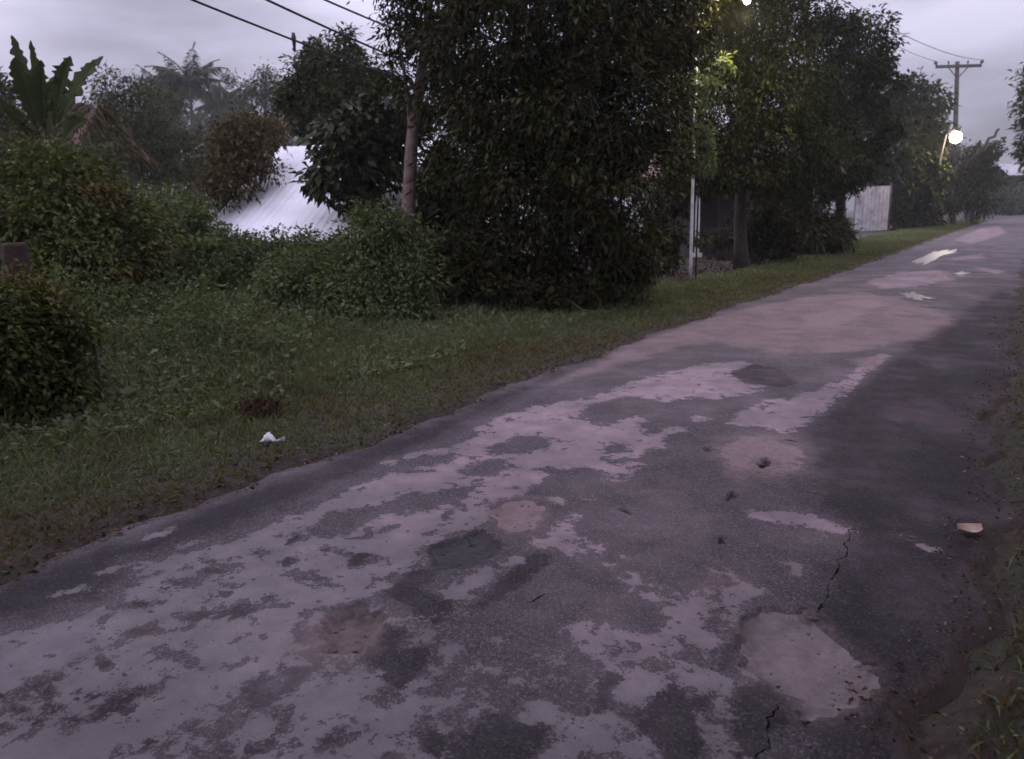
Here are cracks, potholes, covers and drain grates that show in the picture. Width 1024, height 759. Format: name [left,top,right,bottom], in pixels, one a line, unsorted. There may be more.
pothole [705,533,738,550]
pothole [719,488,748,505]
crack [736,694,807,759]
pothole [750,456,782,471]
crack [801,521,868,623]
